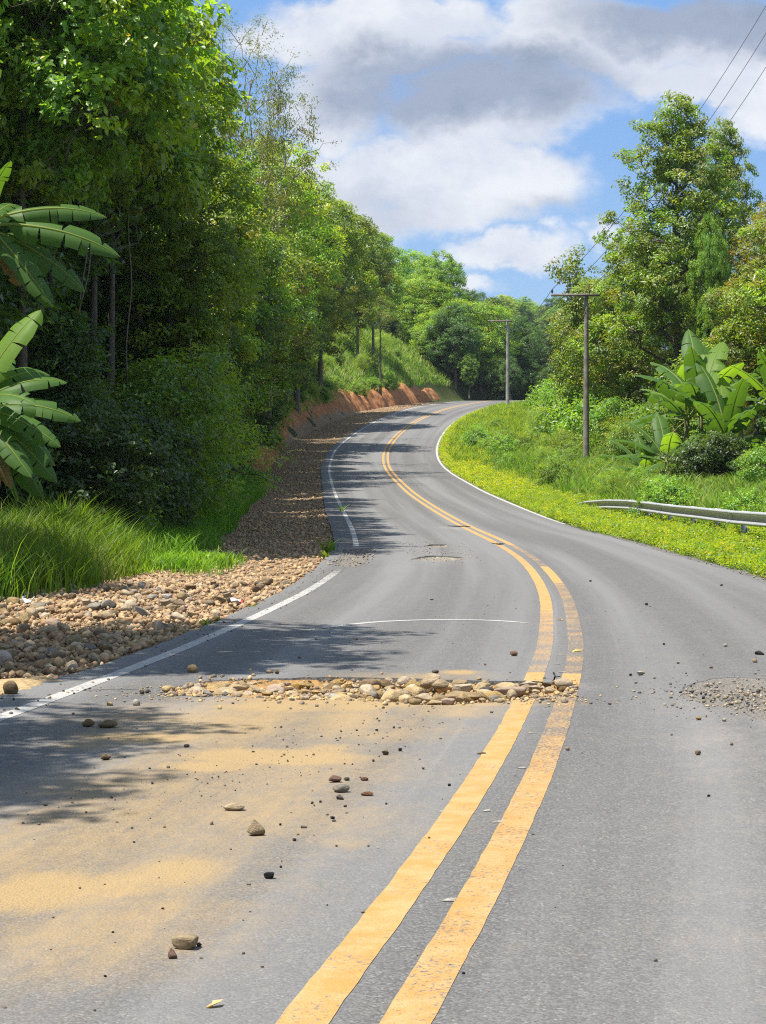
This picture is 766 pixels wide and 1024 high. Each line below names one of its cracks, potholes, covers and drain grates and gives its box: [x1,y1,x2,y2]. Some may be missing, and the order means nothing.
pothole [678,677,766,720]
pothole [175,677,581,704]
